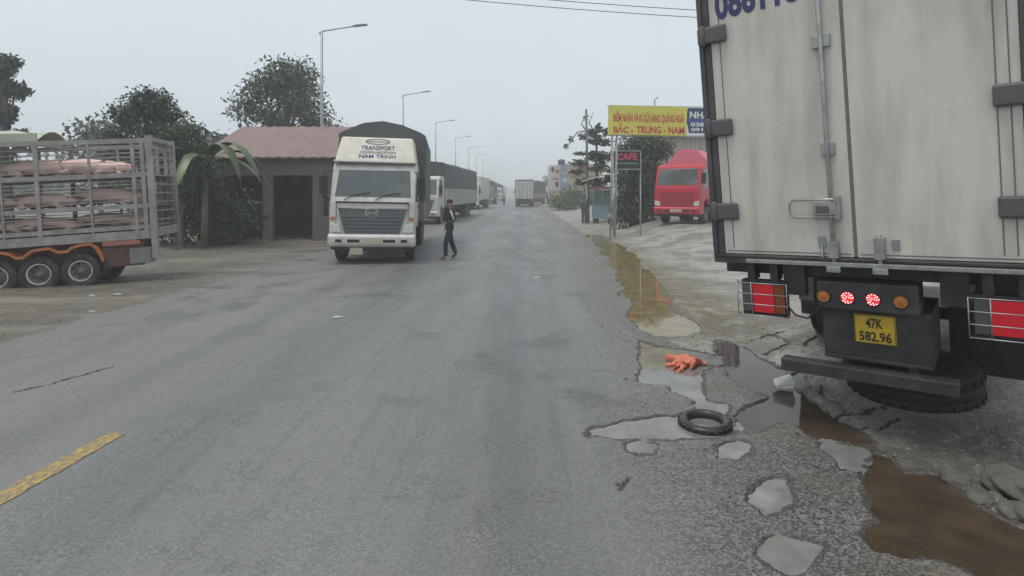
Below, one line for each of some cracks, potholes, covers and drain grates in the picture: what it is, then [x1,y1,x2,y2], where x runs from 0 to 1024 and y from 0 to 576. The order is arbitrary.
pothole [742,475,798,518]
pothole [751,530,832,576]
crack [818,386,902,431]
pothole [711,439,757,461]
pothole [585,235,704,338]
pothole [814,438,873,474]
pothole [711,339,879,446]
pothole [855,445,1024,576]
pothole [581,340,745,442]
pothole [620,437,660,458]
crack [749,326,820,355]
